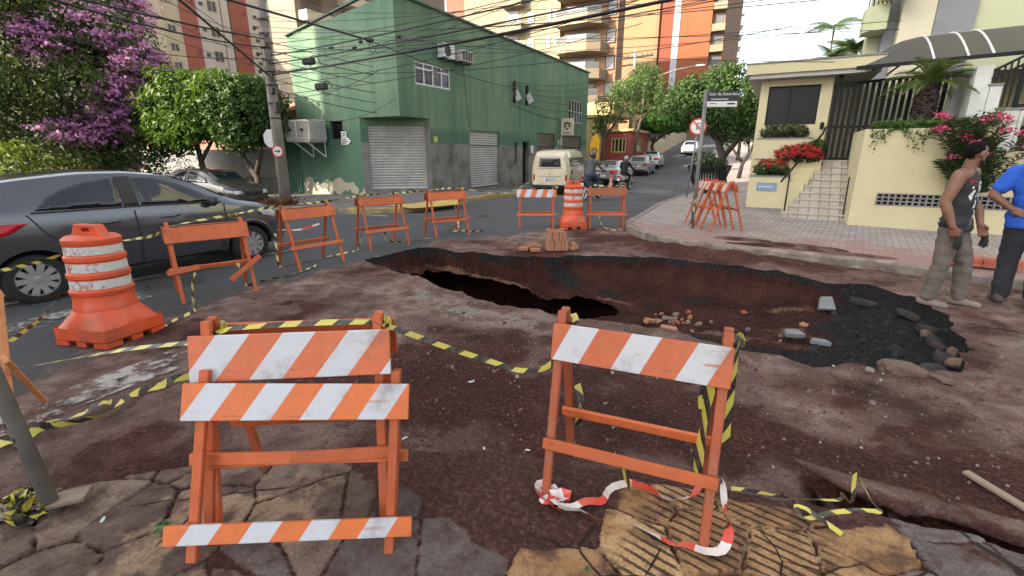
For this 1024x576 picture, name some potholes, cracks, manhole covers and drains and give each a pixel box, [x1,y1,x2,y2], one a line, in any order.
manhole cover [140,276,206,291]
crack [758,458,1024,576]
pothole [364,247,974,373]
crack [133,485,301,547]
